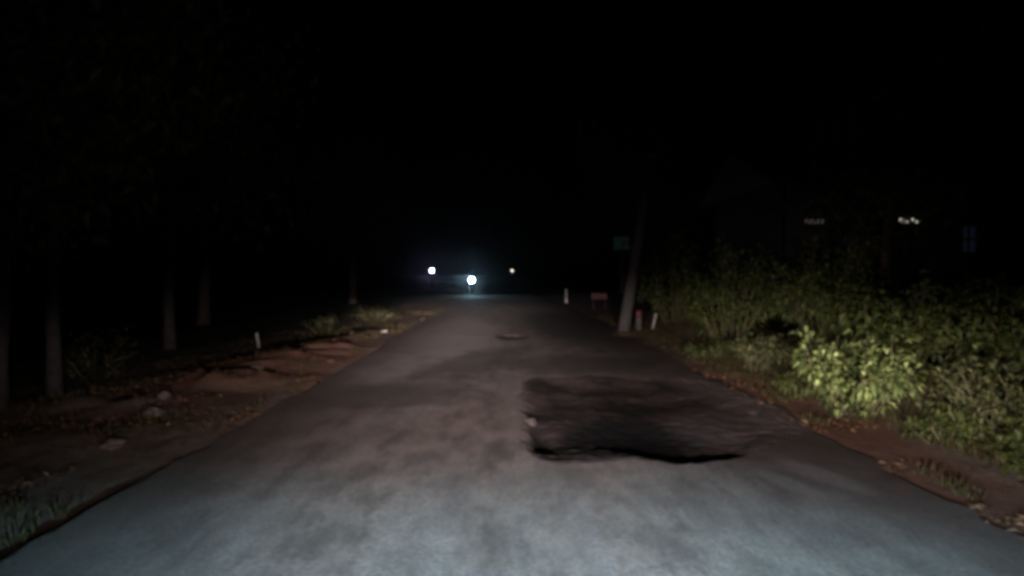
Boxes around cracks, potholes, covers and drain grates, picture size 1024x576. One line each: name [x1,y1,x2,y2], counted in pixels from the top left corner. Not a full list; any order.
pothole [519,374,810,465]
